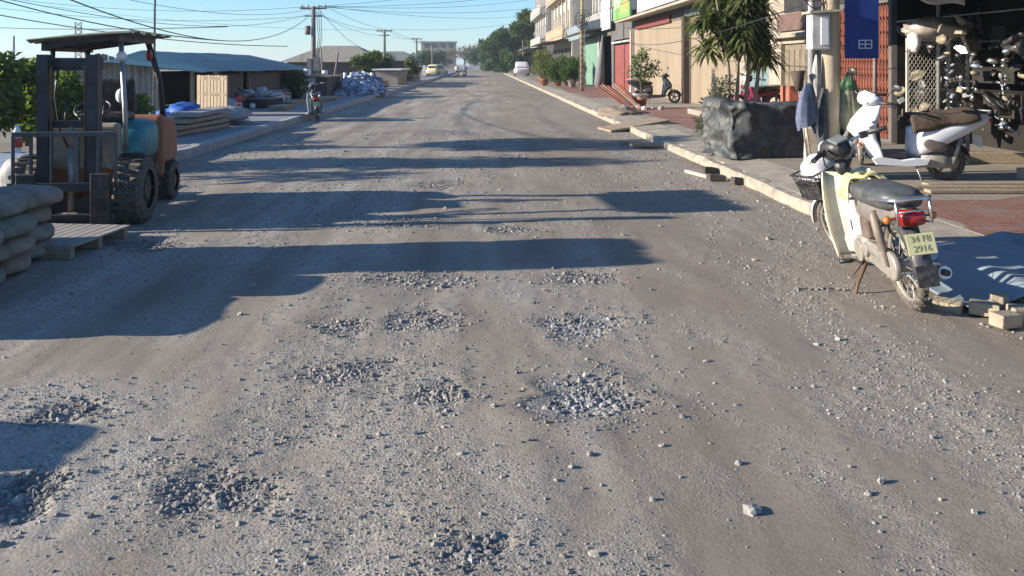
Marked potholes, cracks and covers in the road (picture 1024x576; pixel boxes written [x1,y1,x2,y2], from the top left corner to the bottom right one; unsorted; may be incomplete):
pothole [354,301,499,343]
pothole [253,314,403,346]
pothole [0,377,164,432]
pothole [0,448,110,562]
pothole [369,364,510,415]
pothole [504,262,652,293]
pothole [508,298,661,361]
pothole [289,263,501,293]
pothole [217,353,417,401]
pothole [401,521,548,575]
pothole [87,446,363,533]
pothole [471,356,698,440]
